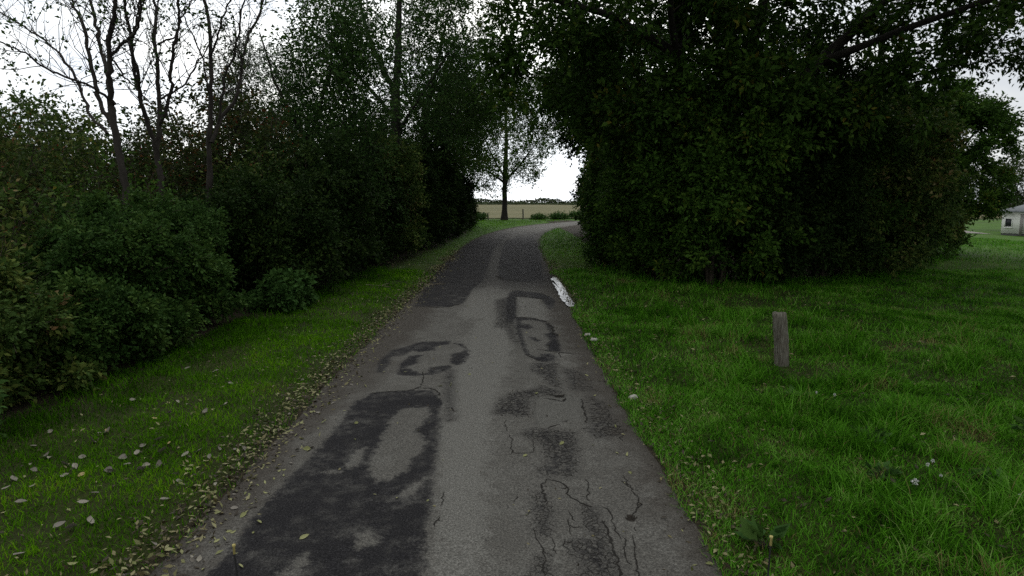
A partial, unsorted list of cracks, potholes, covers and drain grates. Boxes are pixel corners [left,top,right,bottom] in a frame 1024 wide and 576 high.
crack [495,276,642,576]
